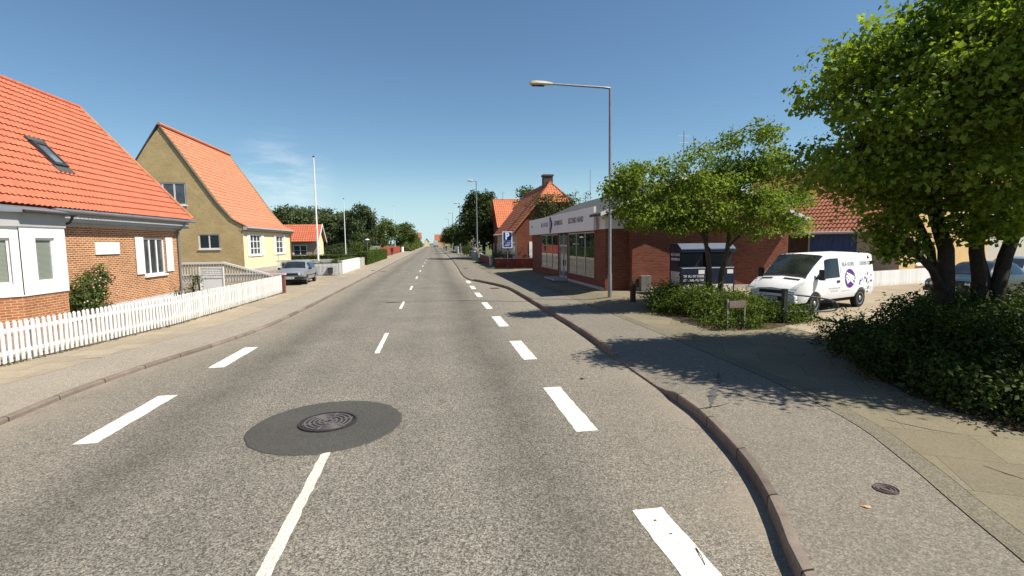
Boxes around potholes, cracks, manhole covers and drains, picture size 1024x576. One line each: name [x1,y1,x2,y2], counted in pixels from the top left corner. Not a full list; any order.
manhole cover [298,412,357,433]
manhole cover [872,483,900,495]
